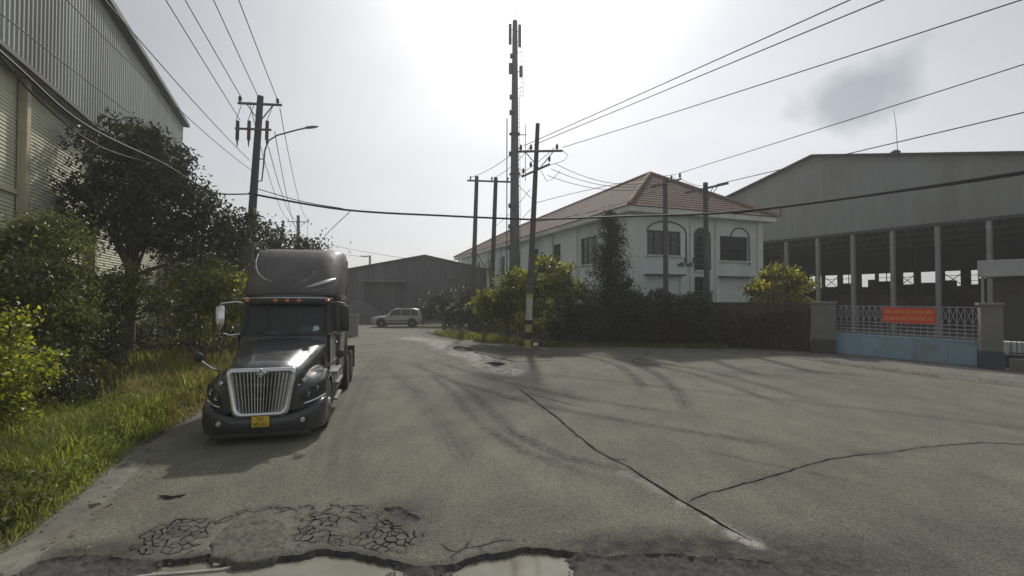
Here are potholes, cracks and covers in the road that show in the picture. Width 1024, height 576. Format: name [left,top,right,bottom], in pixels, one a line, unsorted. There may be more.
crack [127,518,212,555]
pothole [381,506,422,522]
pothole [19,547,792,576]
crack [442,389,1008,562]
crack [213,503,424,553]
